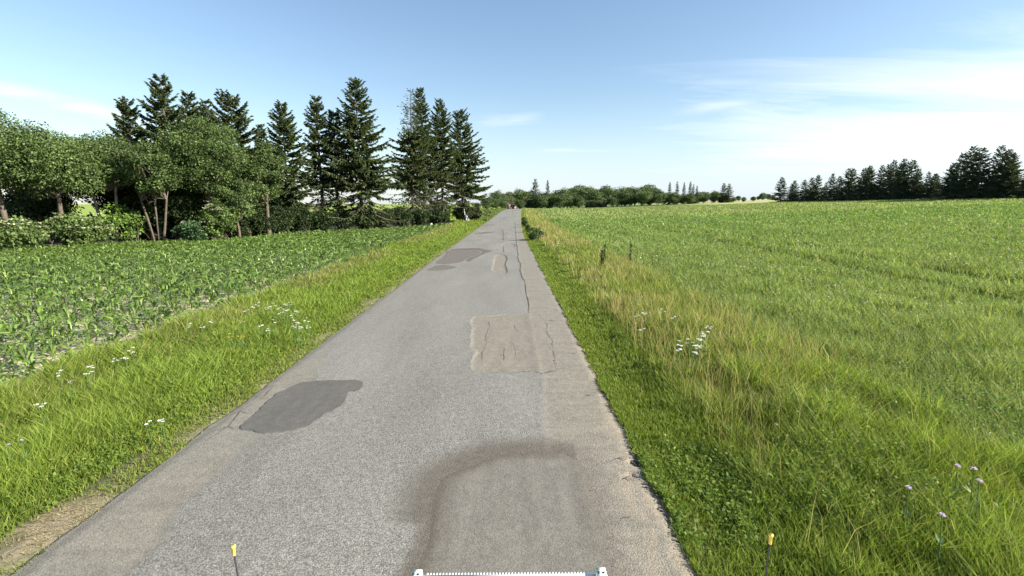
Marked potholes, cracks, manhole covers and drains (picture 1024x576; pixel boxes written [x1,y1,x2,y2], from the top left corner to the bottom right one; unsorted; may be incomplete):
crack [482,210,530,361]
